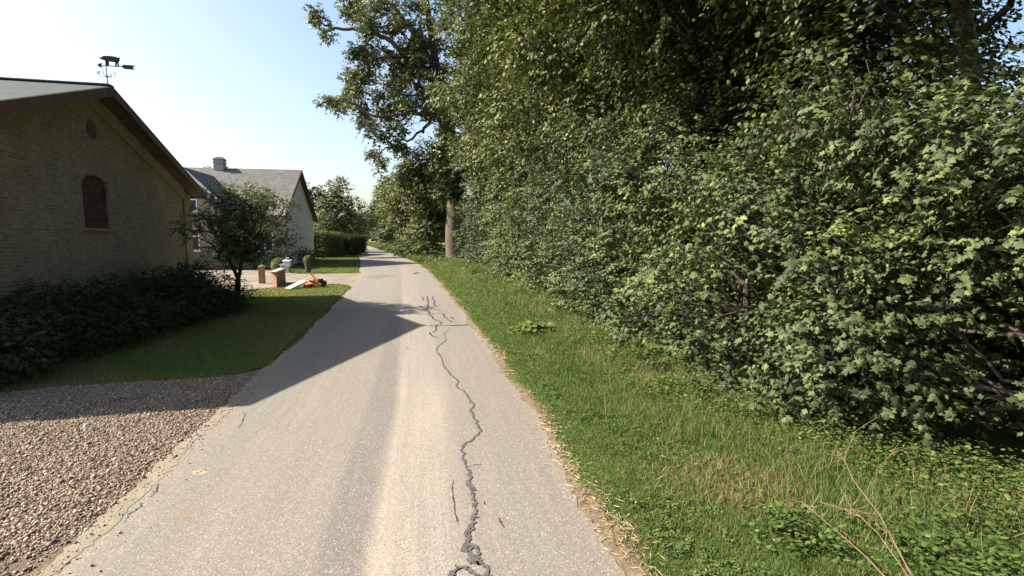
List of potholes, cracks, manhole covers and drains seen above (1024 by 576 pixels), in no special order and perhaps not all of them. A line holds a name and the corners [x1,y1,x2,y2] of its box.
crack [417,296,493,576]
